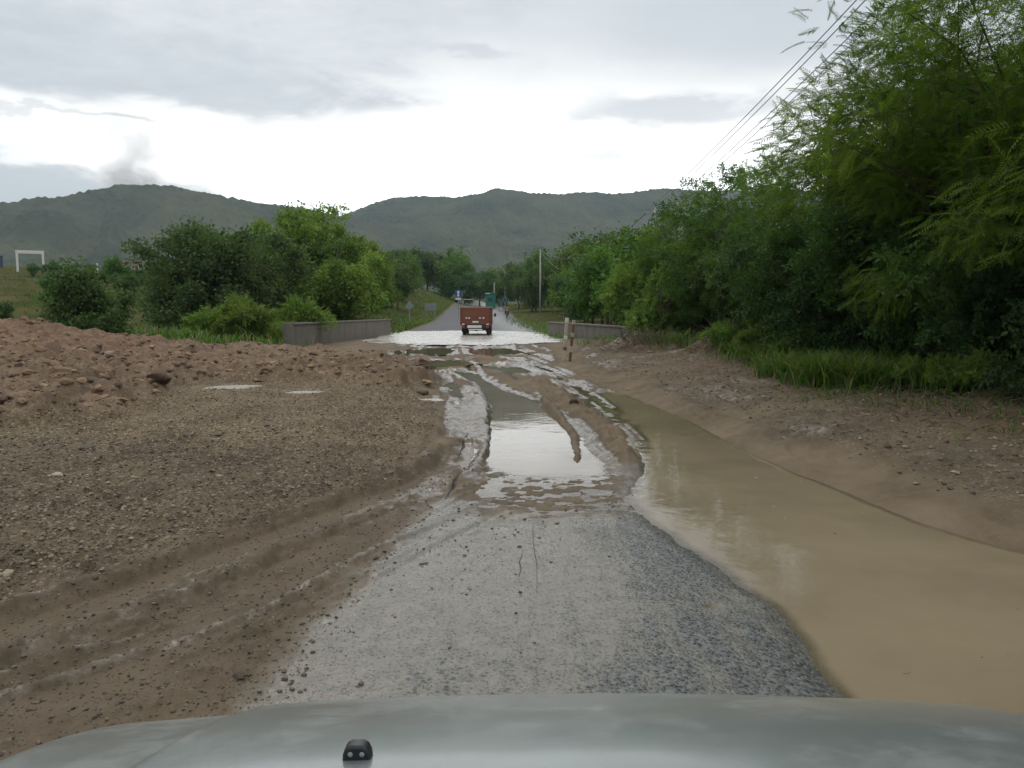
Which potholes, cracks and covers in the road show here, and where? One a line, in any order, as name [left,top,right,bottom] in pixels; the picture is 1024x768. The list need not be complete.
pothole [430,367,635,515]
